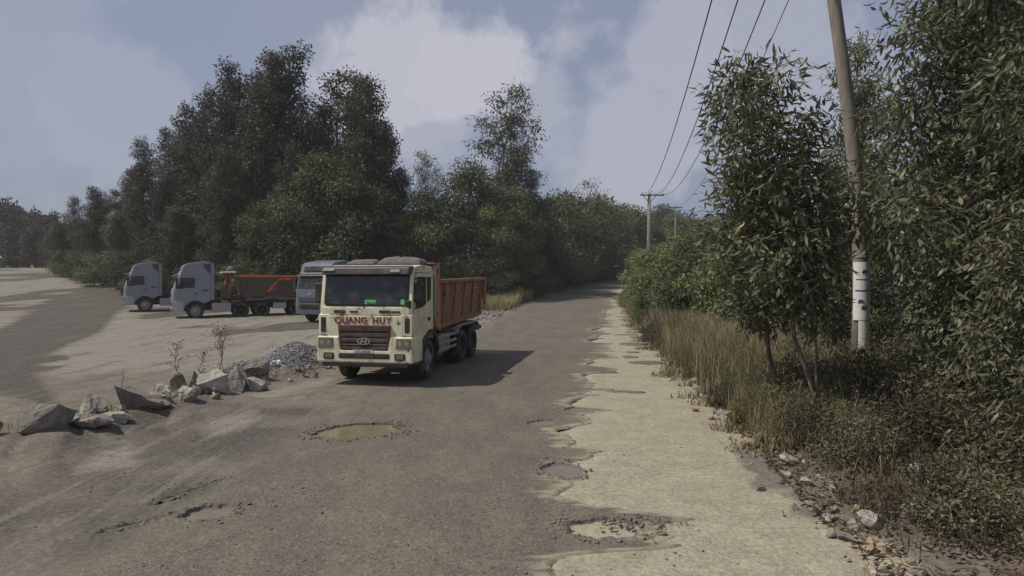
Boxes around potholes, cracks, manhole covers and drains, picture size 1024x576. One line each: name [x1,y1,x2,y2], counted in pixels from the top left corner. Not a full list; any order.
pothole [553,514,655,543]
pothole [302,422,409,442]
pothole [521,418,568,427]
pothole [168,502,246,525]
pothole [534,460,589,482]
pothole [559,406,602,414]
